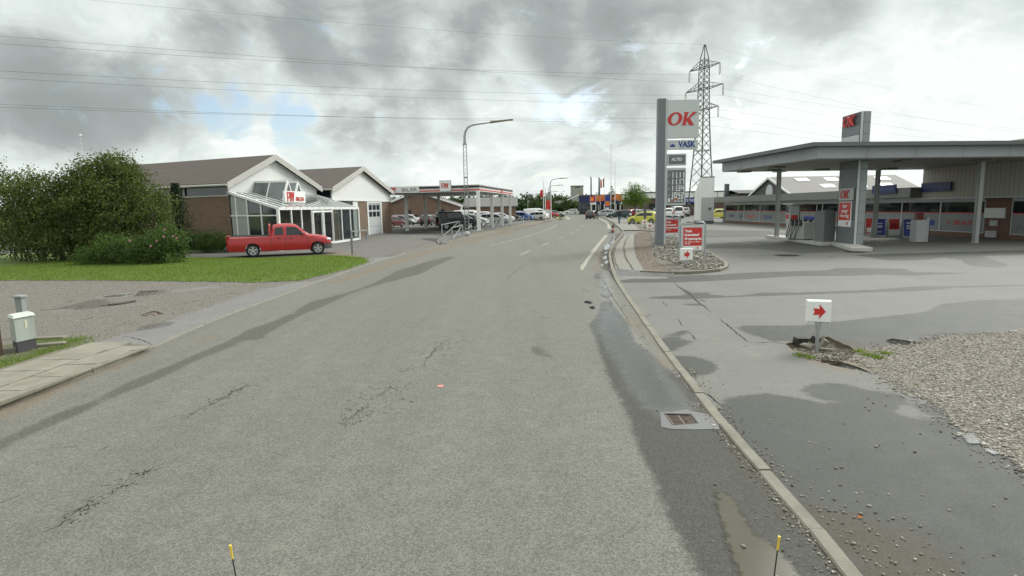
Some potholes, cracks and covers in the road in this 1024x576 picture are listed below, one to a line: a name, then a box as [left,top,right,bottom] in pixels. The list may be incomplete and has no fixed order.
crack [662,282,783,346]
drain grate [660,409,720,429]
crack [335,337,467,426]
crack [42,466,160,533]
crack [171,385,258,419]
pothole [786,337,855,365]
